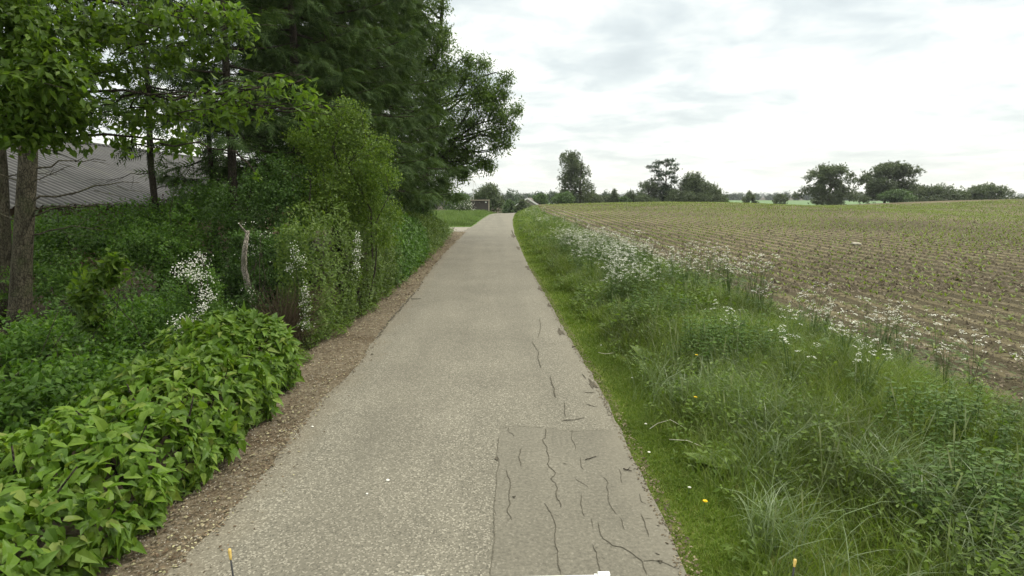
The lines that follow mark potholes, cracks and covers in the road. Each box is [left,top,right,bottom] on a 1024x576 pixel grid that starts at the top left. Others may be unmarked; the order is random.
crack [503,428,521,519]
crack [532,319,675,574]
